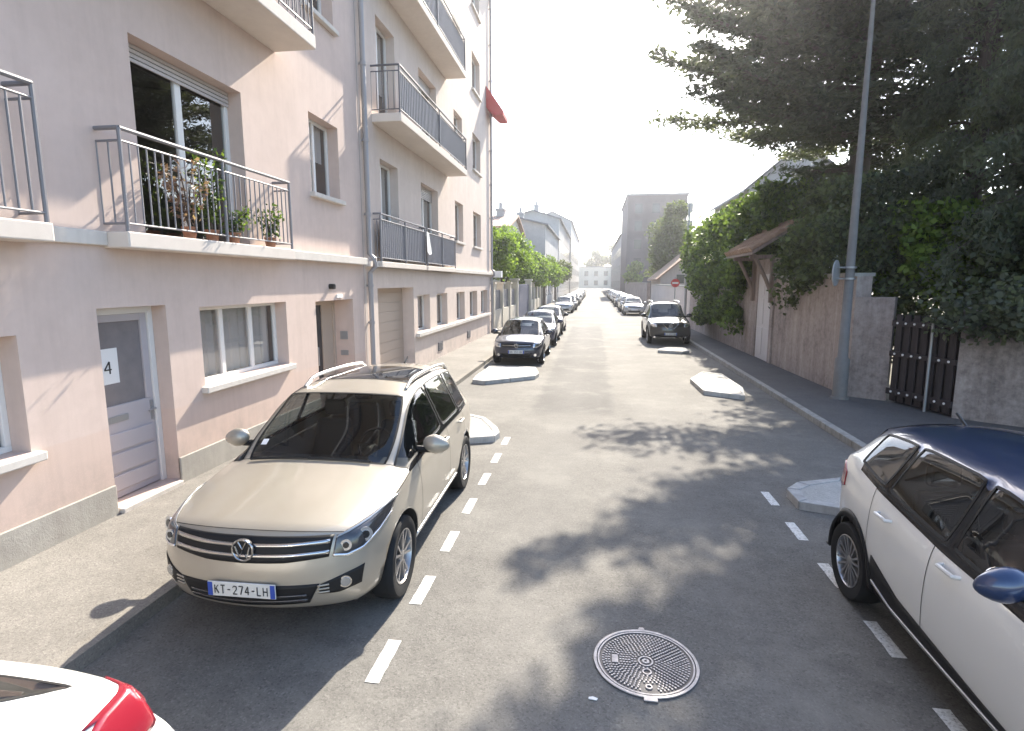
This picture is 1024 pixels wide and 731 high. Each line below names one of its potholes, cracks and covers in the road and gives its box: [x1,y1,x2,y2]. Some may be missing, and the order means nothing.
manhole cover [594,627,700,703]
